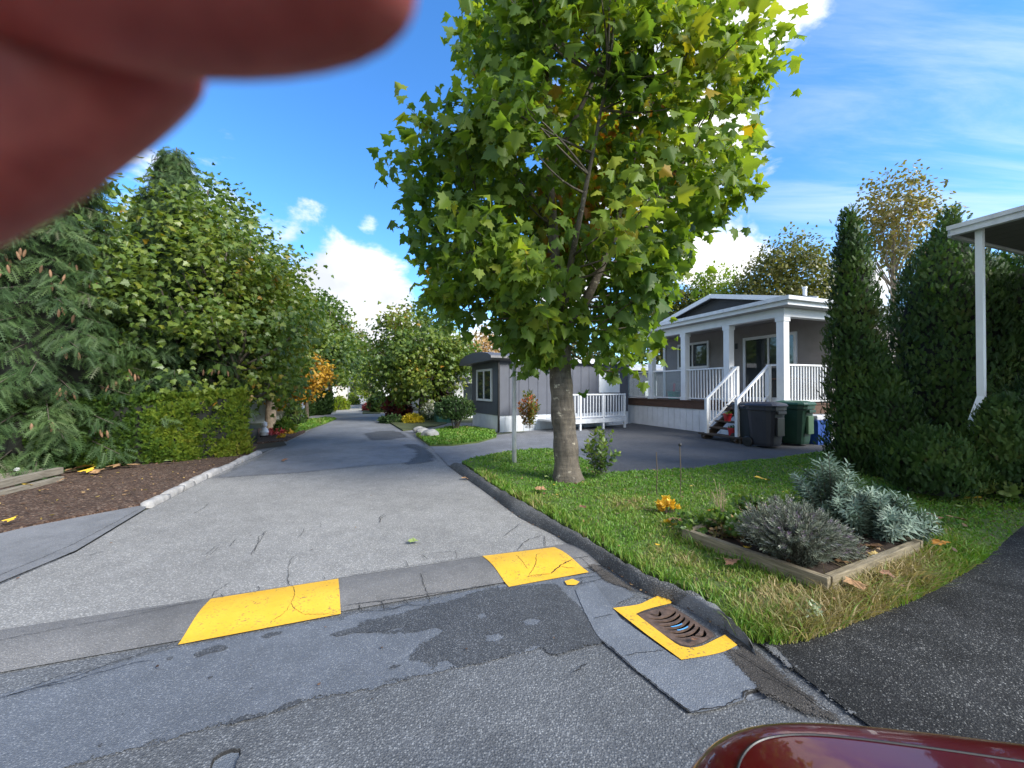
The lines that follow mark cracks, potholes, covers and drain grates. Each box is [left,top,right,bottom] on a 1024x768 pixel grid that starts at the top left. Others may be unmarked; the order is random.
drain grate [637,605,716,648]
